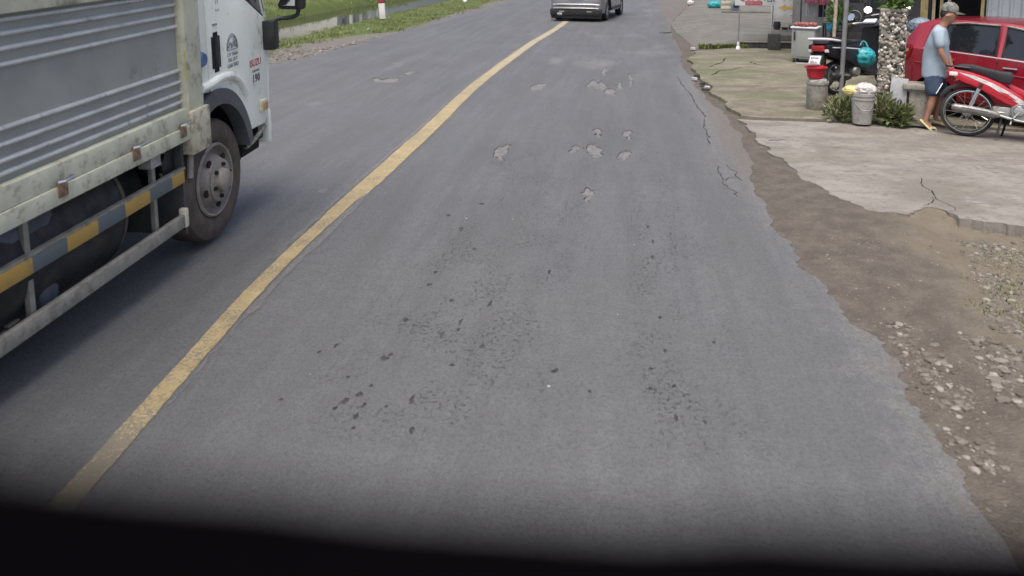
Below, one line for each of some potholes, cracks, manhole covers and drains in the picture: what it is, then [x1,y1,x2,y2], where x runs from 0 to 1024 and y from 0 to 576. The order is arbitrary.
pothole [616,150,632,160]
crack [717,164,742,196]
pothole [586,143,605,158]
crack [678,77,710,144]
pothole [585,79,608,90]
pothole [581,186,596,203]
pothole [493,143,512,162]
